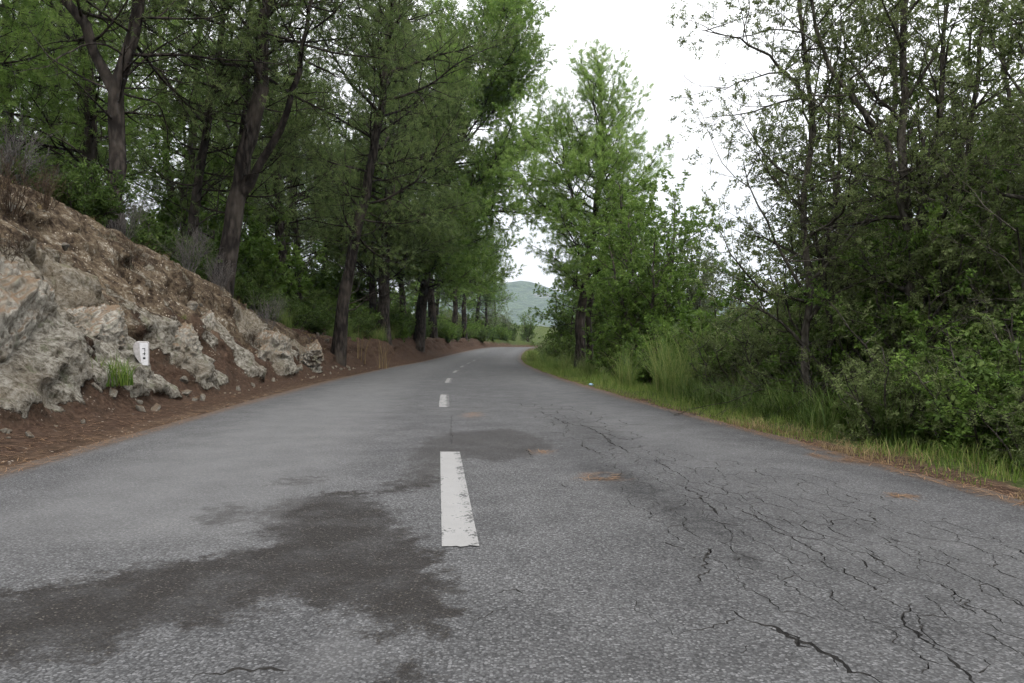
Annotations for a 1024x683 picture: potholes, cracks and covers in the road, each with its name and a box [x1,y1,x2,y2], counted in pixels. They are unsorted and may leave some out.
crack [521,404,642,455]
crack [596,446,1024,683]
crack [187,666,291,681]
